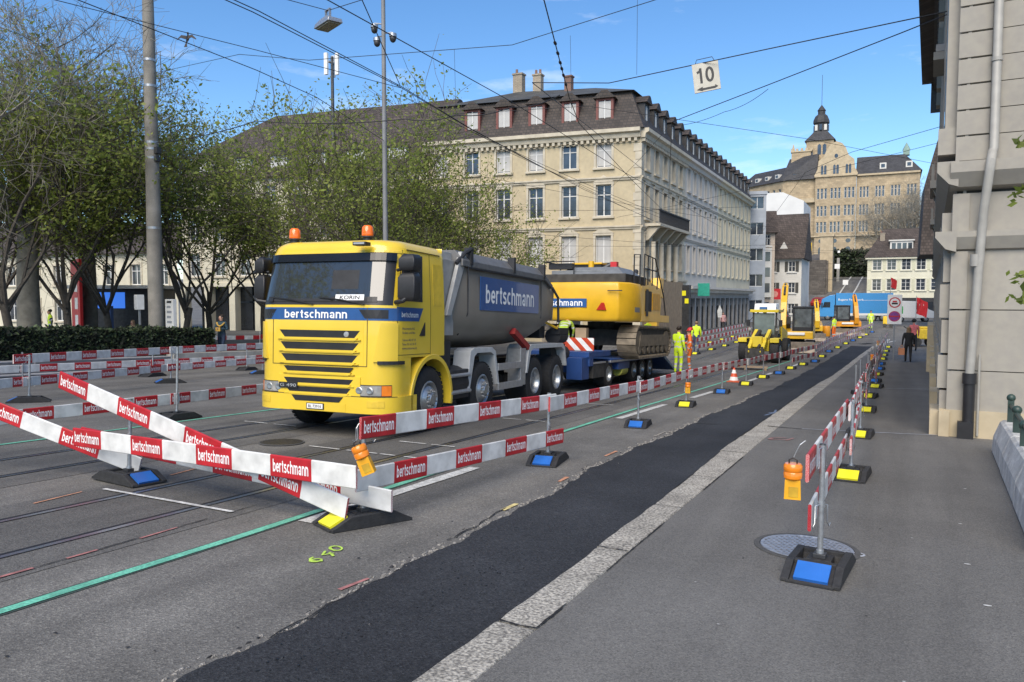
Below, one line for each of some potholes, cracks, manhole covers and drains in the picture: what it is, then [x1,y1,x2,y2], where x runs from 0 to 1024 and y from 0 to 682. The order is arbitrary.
manhole cover [754,533,861,559]
crack [446,508,505,540]
